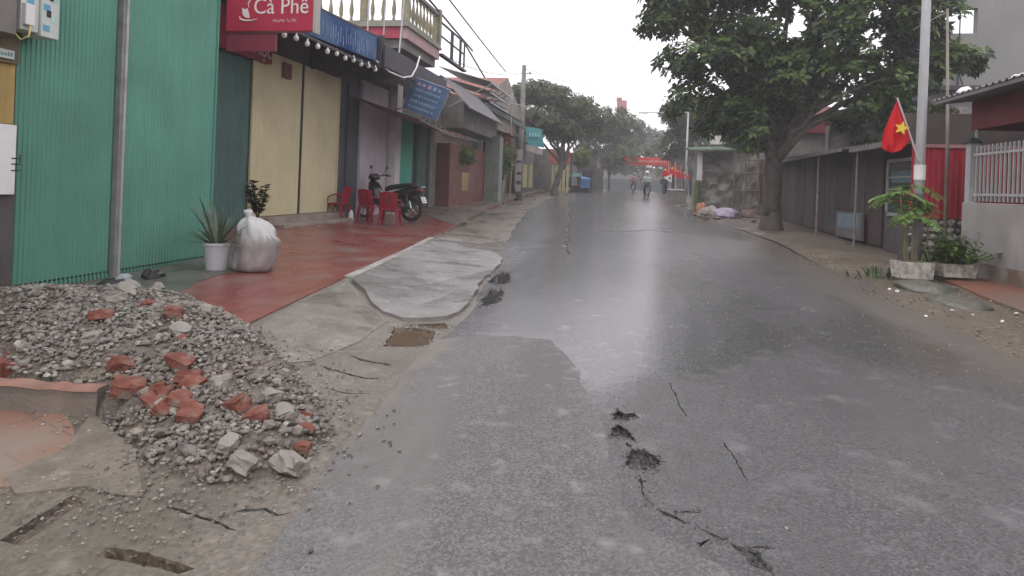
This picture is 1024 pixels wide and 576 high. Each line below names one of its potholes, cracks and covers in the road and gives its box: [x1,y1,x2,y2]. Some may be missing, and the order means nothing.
pothole [609,408,640,423]
crack [635,475,776,576]
pothole [622,447,664,474]
crack [322,355,390,394]
pothole [487,271,513,285]
crack [562,205,692,255]
pothole [378,325,440,348]
pothole [479,287,505,307]
crack [167,507,290,531]
pothole [607,422,637,442]
